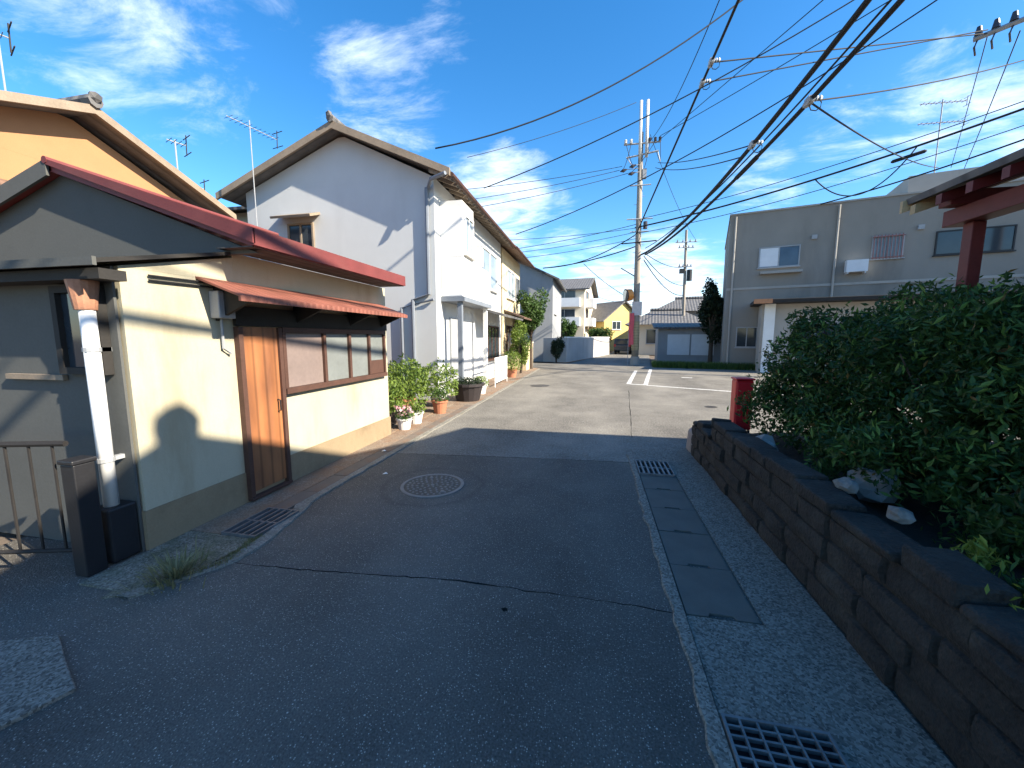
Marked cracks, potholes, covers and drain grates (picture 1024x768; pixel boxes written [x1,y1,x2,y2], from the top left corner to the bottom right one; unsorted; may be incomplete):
crack [28,536,846,637]
drain grate [720,713,850,768]
manhole cover [400,474,464,498]
drain grate [635,460,676,478]
drain grate [221,507,299,539]
